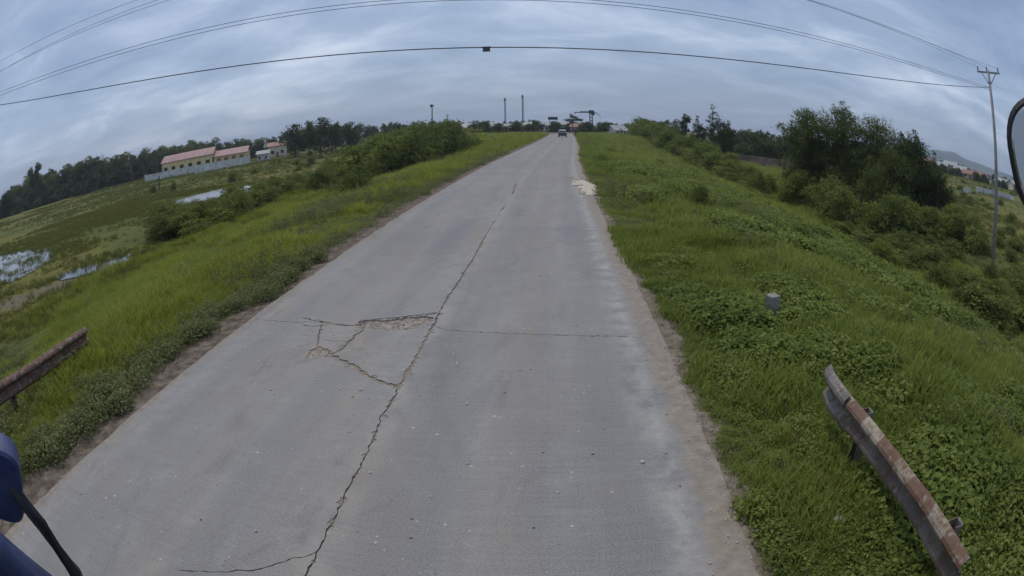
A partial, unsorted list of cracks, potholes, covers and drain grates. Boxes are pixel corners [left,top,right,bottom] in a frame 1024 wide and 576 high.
pothole [357,316,434,331]
crack [180,183,642,576]
